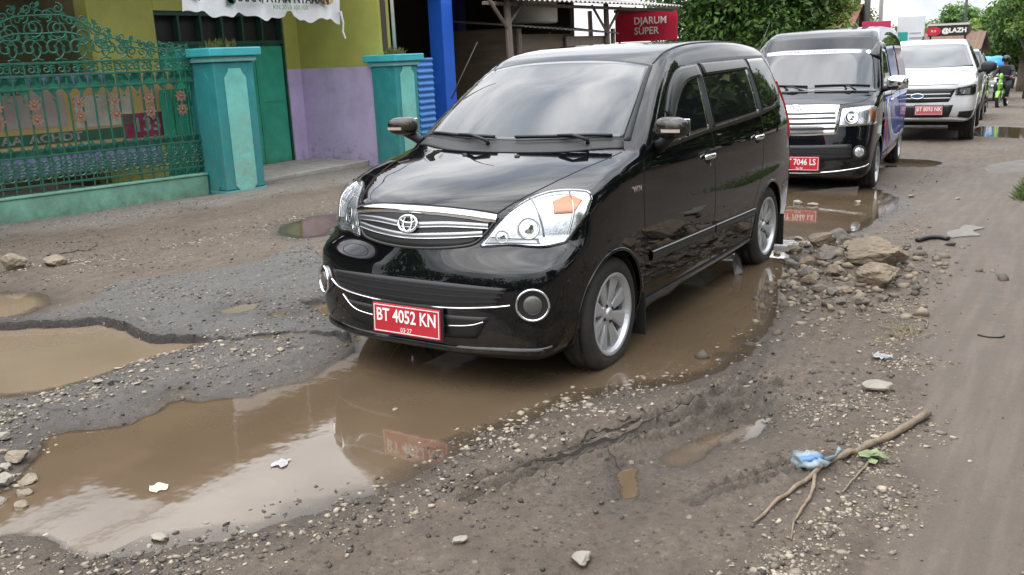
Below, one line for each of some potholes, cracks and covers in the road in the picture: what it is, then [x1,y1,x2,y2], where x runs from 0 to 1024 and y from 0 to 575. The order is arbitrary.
crack [493,394,706,475]
pothole [0,246,807,569]
pothole [268,212,339,241]
pothole [774,185,910,248]
